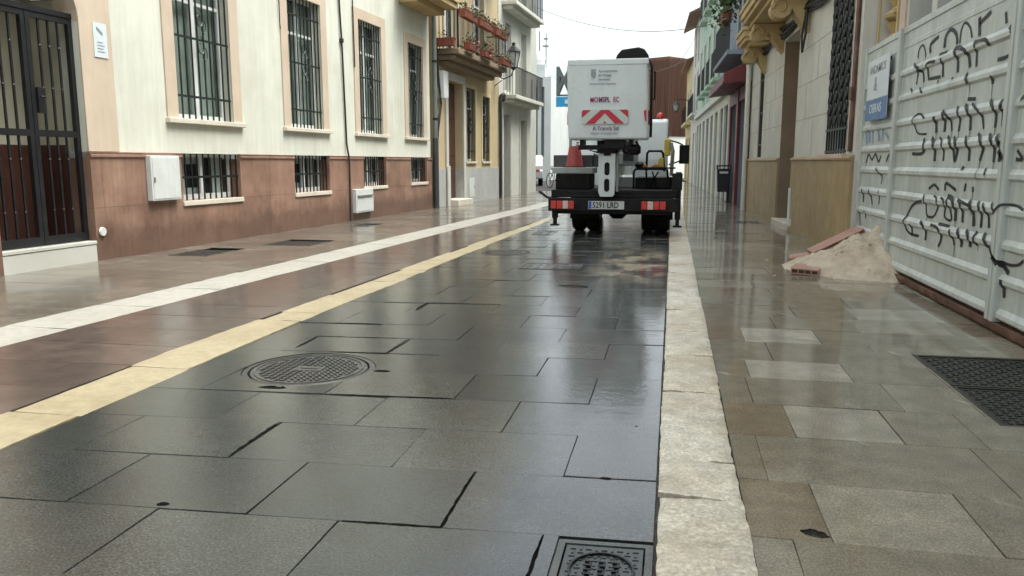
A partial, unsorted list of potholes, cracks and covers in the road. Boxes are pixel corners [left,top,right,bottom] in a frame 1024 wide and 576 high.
pothole [800,529,830,538]
crack [525,536,543,576]
crack [231,423,278,455]
manhole cover [241,354,375,387]
